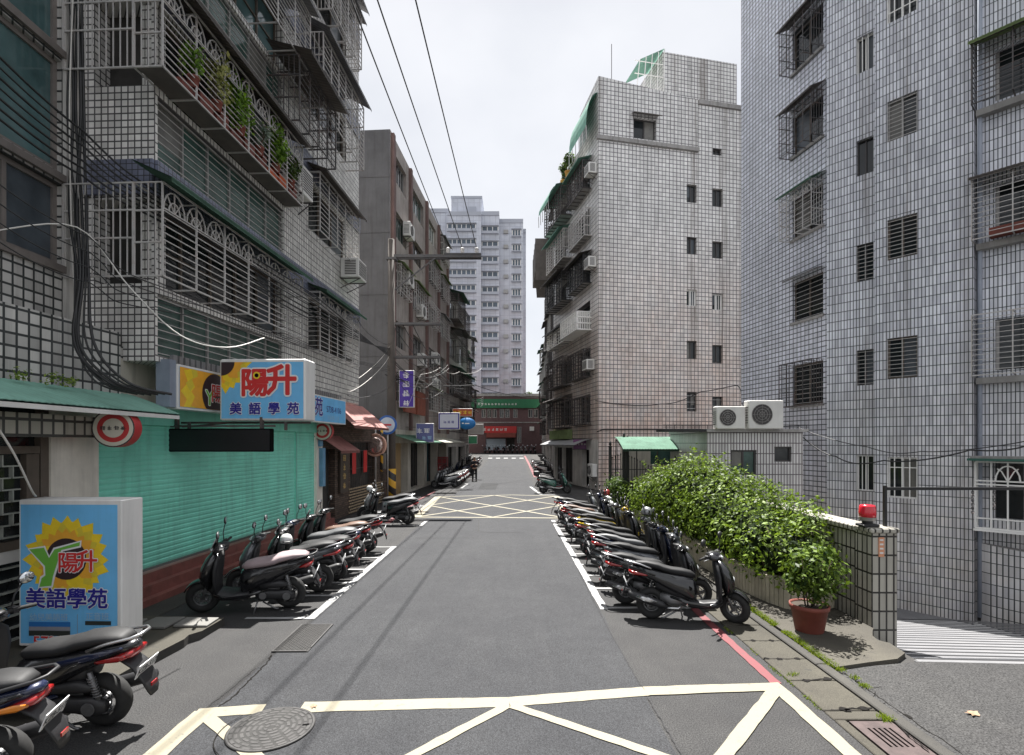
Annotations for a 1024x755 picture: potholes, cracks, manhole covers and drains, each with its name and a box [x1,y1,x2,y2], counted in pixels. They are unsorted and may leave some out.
manhole cover [224,707,316,753]
drain grate [849,721,936,755]
